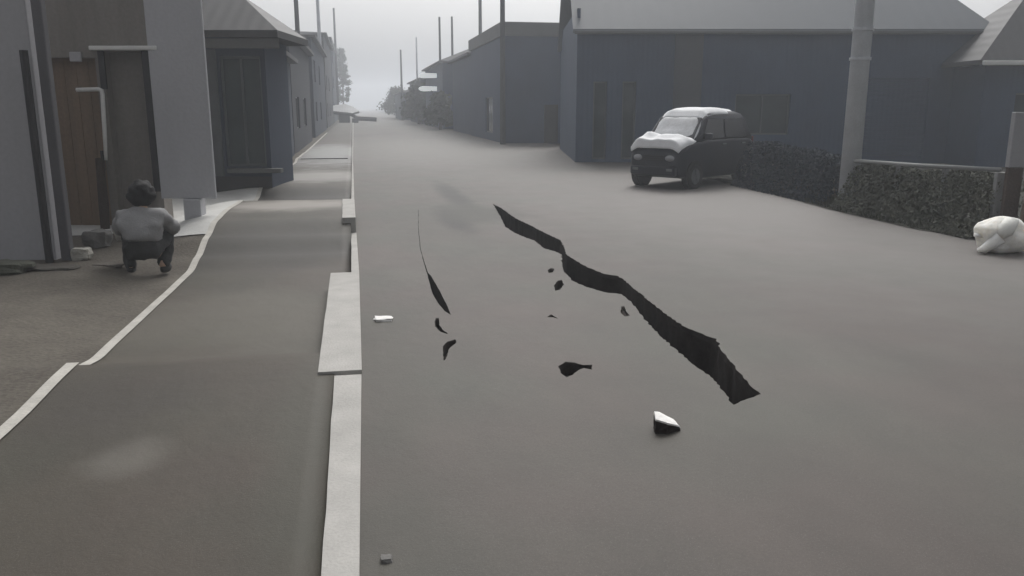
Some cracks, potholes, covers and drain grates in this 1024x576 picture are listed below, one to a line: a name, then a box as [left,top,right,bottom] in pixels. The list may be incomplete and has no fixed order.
crack [418,214,451,334]
crack [493,204,760,404]
pothole [558,362,592,377]
